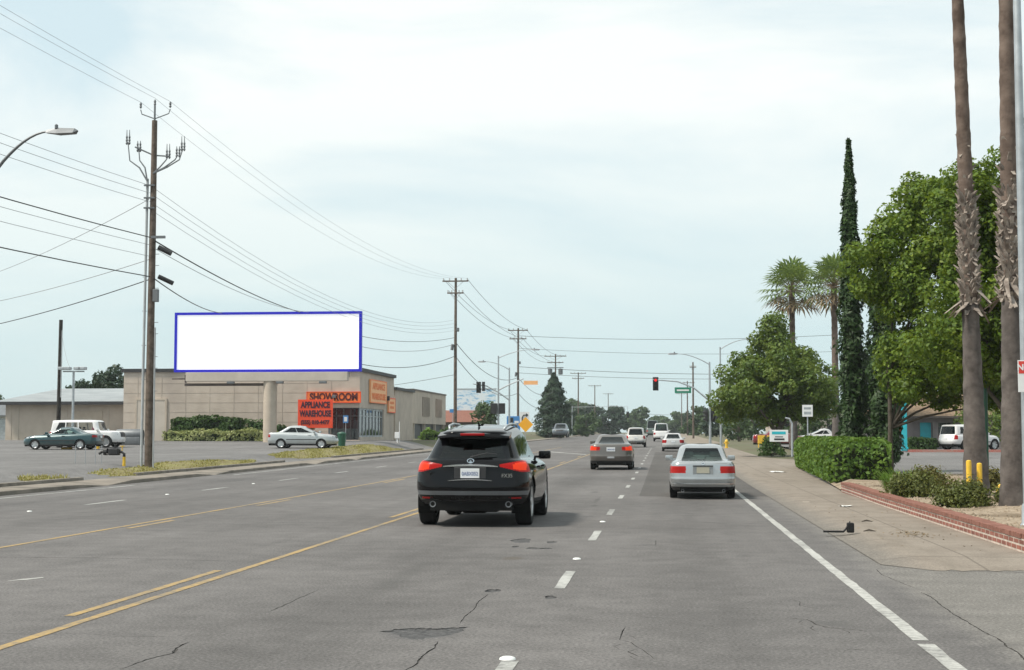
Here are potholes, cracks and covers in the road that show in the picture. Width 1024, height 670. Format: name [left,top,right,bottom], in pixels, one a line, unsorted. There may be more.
pothole [379,627,467,640]
crack [616,626,658,661]
crack [406,594,488,670]
crack [122,642,188,669]
